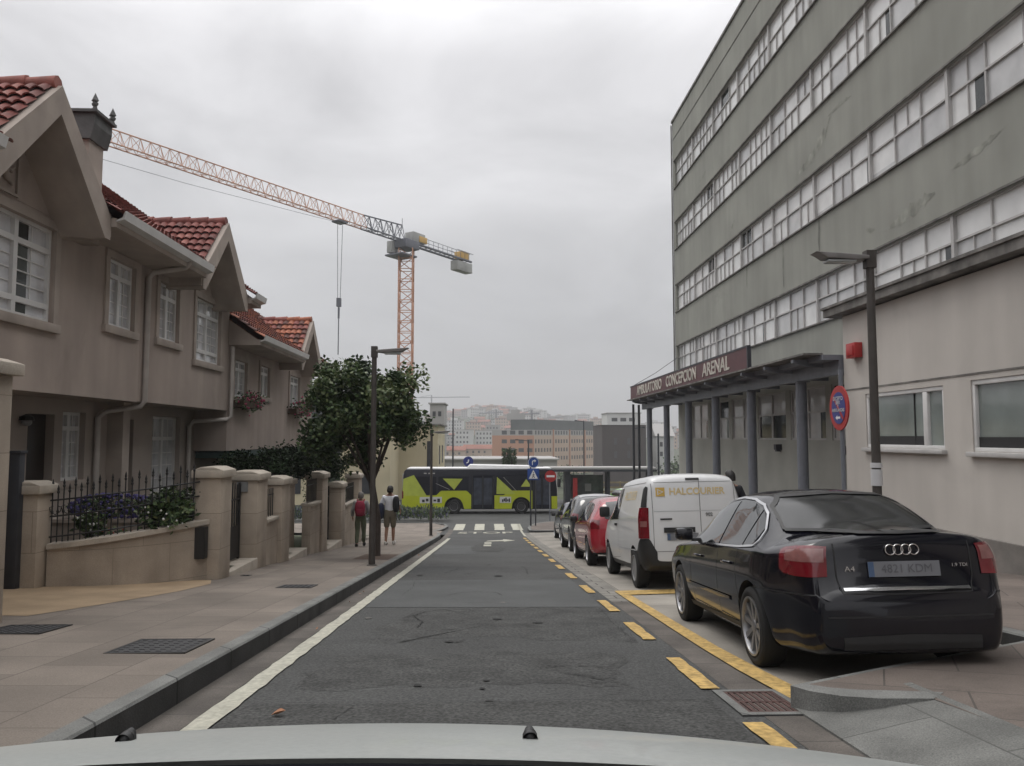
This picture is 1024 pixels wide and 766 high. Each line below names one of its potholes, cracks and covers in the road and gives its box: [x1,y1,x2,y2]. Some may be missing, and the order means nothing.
manhole cover [0,624,73,635]
manhole cover [103,638,215,654]
